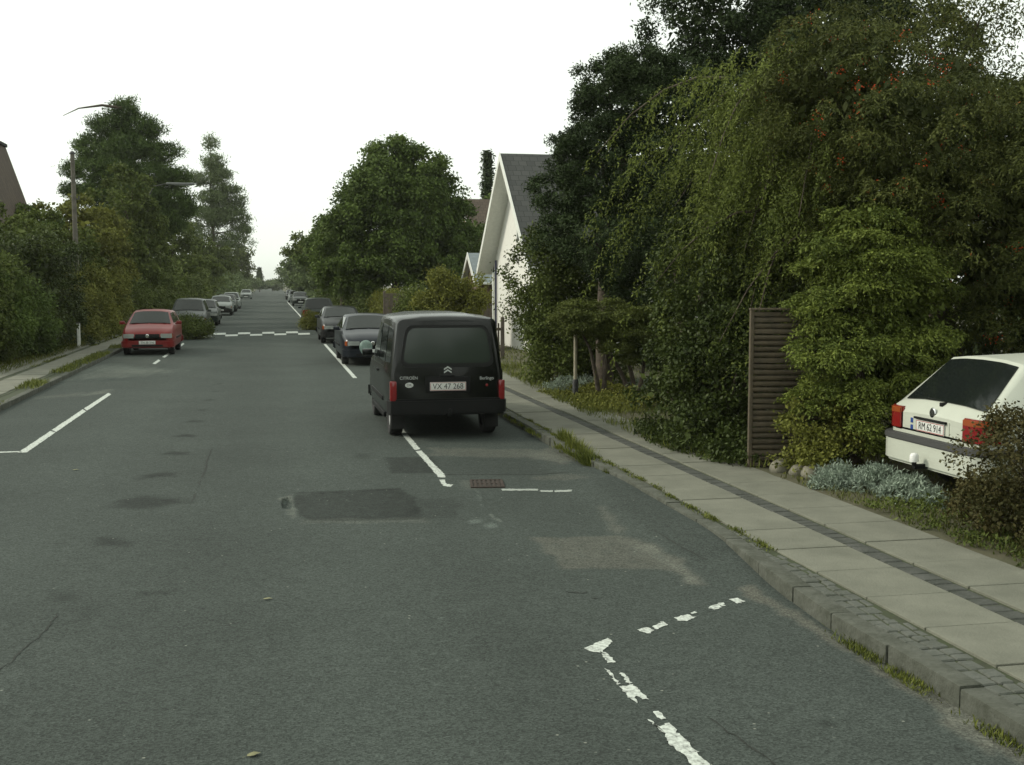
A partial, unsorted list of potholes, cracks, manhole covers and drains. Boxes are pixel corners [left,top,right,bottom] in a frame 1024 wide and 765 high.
crack [0,613,58,669]
crack [709,717,776,765]
crack [179,435,212,502]
